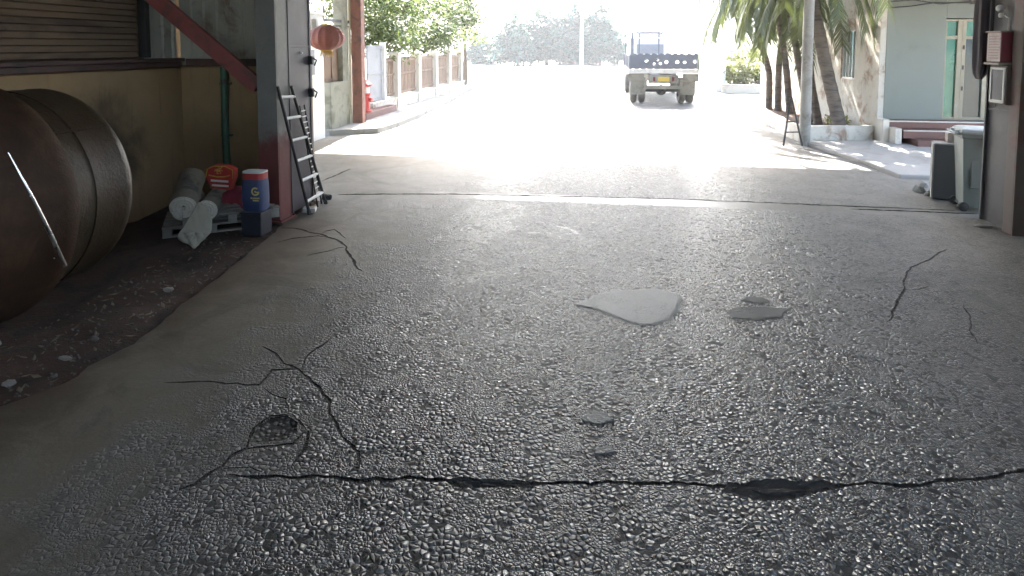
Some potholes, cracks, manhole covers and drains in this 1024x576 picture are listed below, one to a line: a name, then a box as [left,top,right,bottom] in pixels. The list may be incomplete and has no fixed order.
crack [280,228,362,271]
crack [886,250,946,323]
pothole [722,479,842,501]
pothole [253,416,298,443]
crack [963,307,978,344]
crack [167,340,1024,490]
